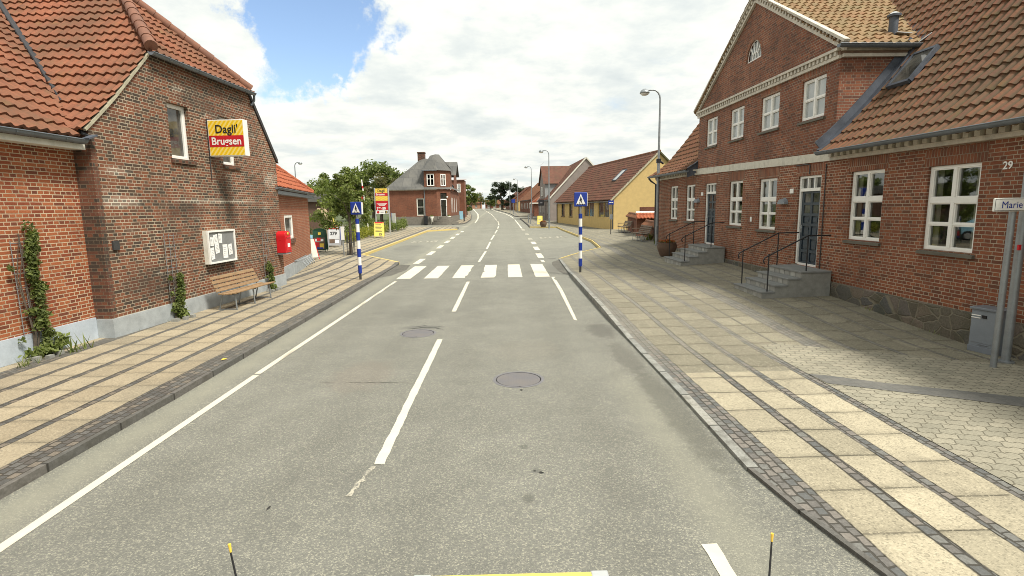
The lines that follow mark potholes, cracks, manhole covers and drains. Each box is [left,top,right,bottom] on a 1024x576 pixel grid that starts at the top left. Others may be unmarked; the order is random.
manhole cover [400,329,436,338]
manhole cover [493,371,544,388]
